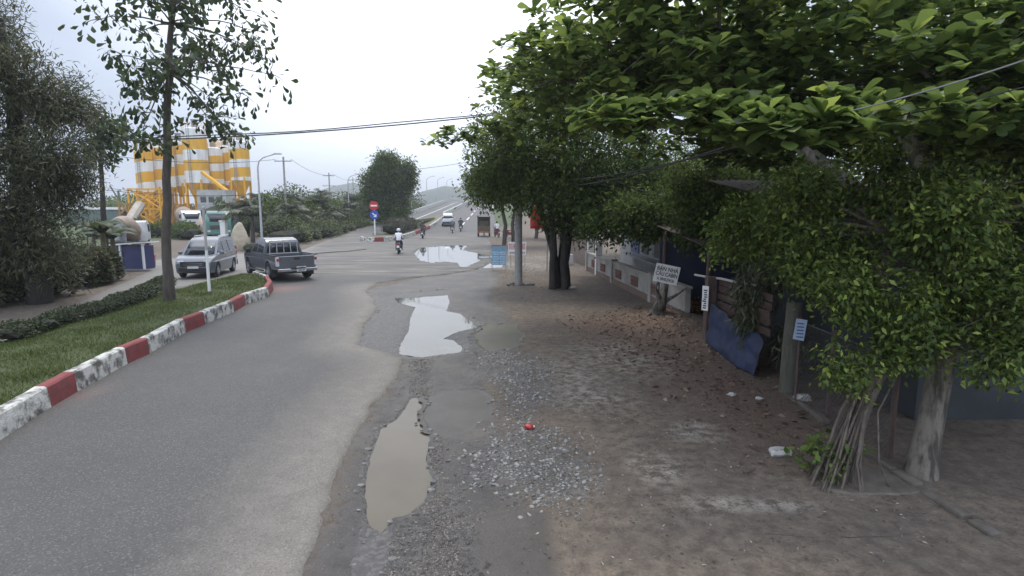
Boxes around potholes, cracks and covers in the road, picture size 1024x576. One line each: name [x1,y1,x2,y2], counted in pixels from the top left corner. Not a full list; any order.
pothole [351,394,439,576]
pothole [411,245,492,267]
pothole [414,388,498,439]
pothole [471,322,525,351]
pothole [358,288,483,359]
